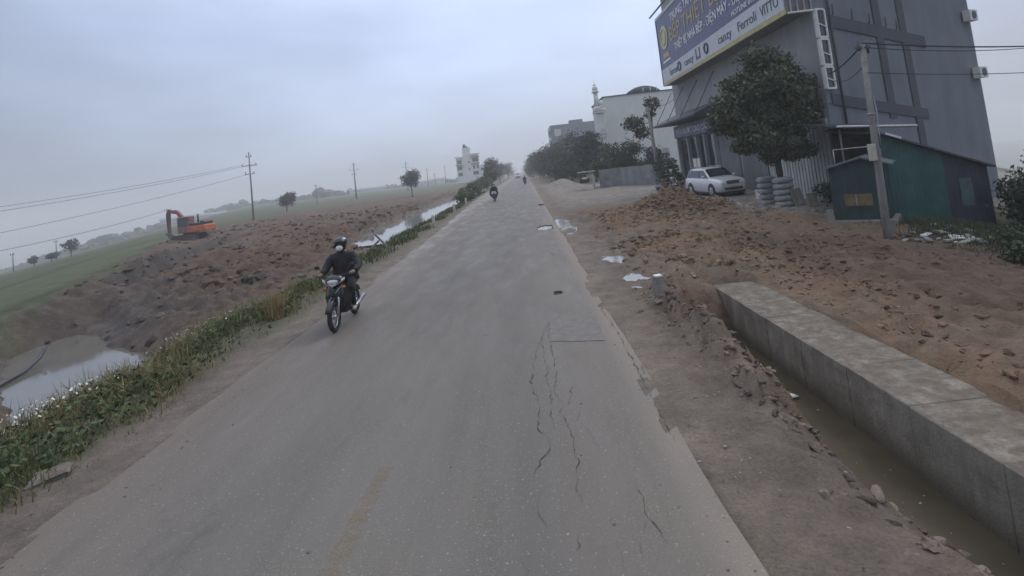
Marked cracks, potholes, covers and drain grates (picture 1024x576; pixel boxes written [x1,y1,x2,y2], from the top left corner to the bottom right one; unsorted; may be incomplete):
crack [529,322,595,503]
